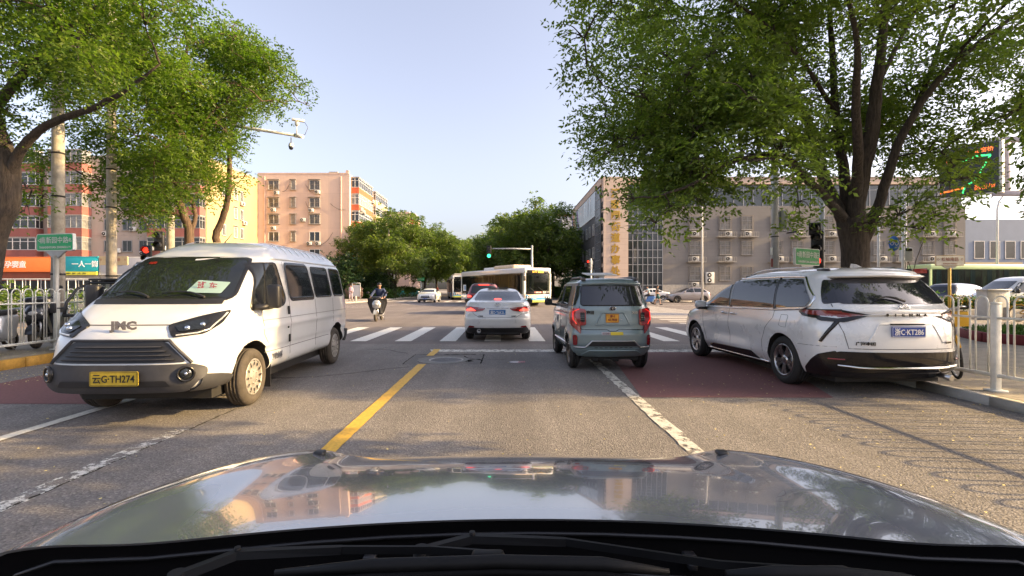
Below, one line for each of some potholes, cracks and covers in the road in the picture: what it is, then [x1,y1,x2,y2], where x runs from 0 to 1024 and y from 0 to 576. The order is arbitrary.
manhole cover [417,356,468,364]
